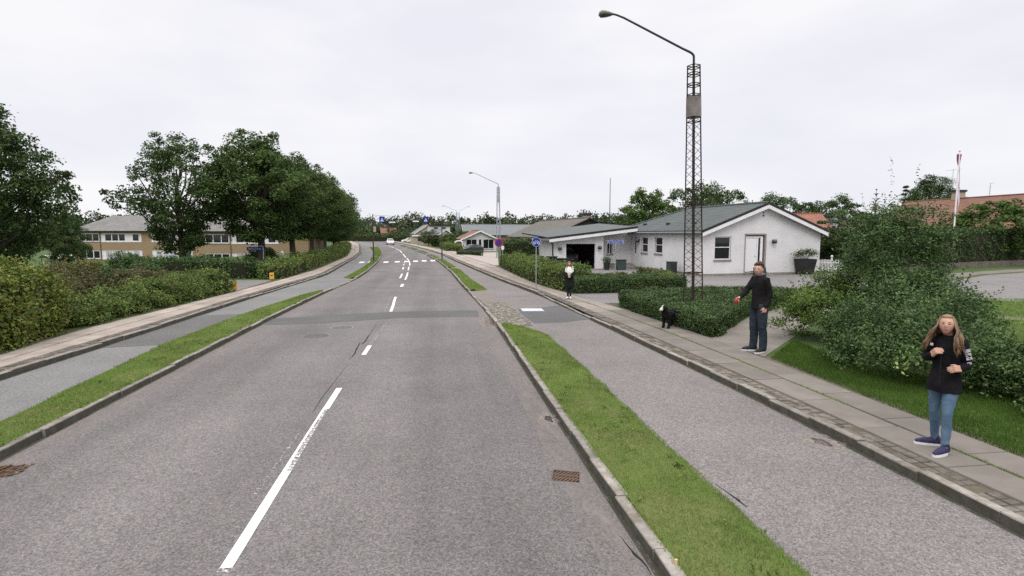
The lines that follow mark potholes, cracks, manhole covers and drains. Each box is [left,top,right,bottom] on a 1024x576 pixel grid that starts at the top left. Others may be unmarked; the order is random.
drain grate [551,469,581,483]
crack [620,536,652,575]
drain grate [0,463,35,478]
